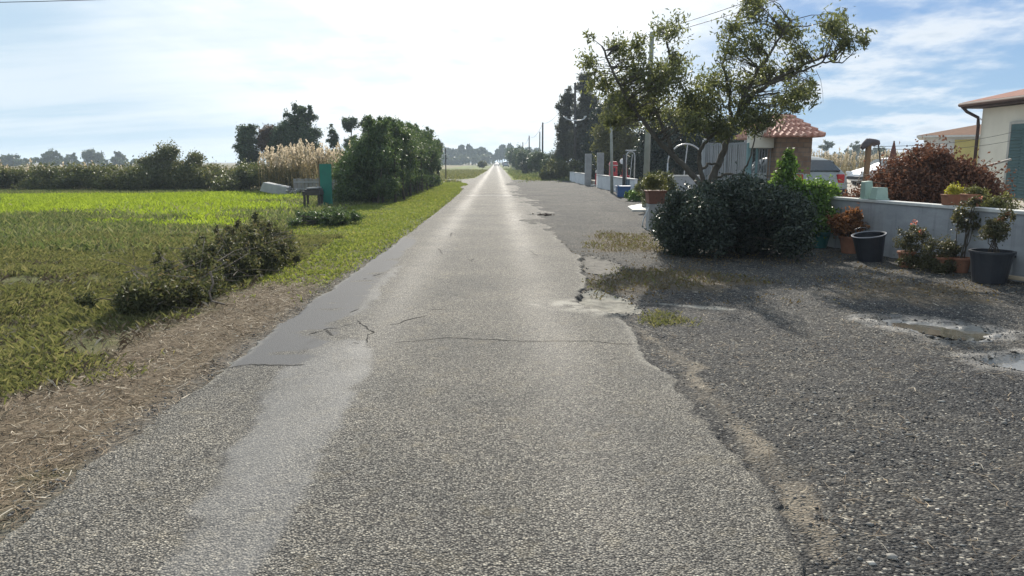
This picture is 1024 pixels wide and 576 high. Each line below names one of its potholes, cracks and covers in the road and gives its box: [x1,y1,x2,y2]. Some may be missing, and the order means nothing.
pothole [972,351,1024,372]
crack [310,310,375,344]
pothole [860,317,1020,343]
